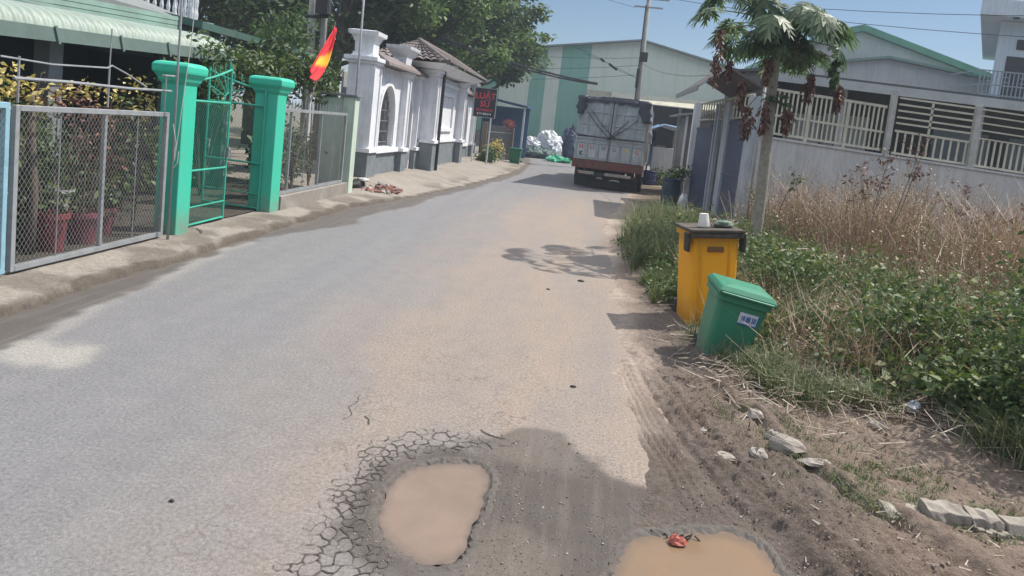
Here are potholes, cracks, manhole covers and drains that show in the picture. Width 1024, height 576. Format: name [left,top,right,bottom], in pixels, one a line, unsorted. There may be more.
pothole [367,456,501,574]
crack [273,427,519,576]
pothole [598,523,794,576]
